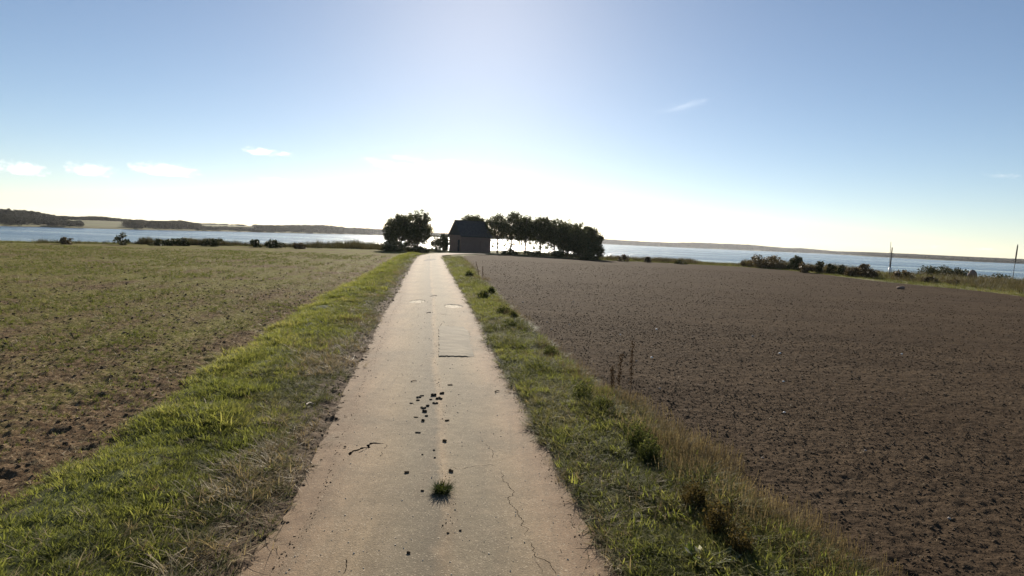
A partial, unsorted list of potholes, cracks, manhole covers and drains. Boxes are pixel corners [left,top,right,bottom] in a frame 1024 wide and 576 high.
crack [448,443,566,576]
crack [344,441,387,457]
